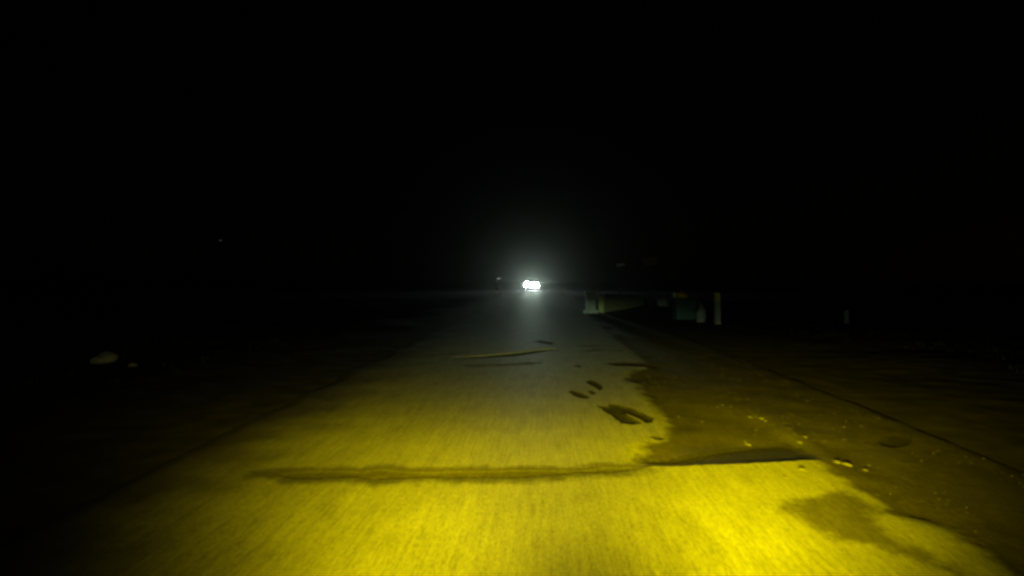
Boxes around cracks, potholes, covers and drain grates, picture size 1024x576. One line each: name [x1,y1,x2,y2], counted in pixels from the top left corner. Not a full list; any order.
crack [418,353,534,366]
pothole [874,433,912,448]
pothole [596,403,655,425]
